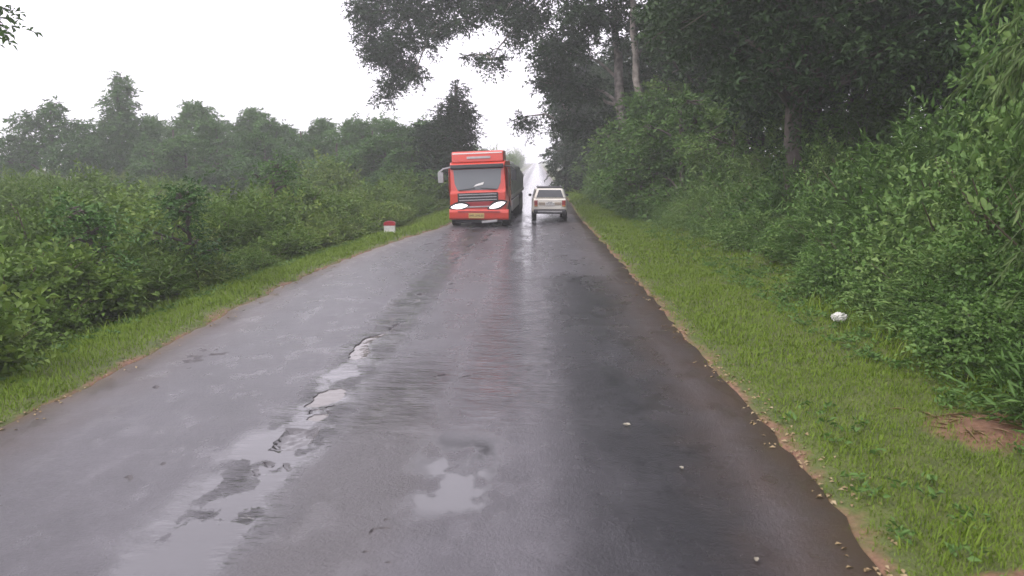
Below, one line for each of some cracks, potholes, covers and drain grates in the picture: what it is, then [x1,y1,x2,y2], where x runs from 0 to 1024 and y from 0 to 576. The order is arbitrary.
pothole [348,332,387,360]
pothole [268,426,321,453]
pothole [304,388,347,407]
pothole [306,413,329,422]
